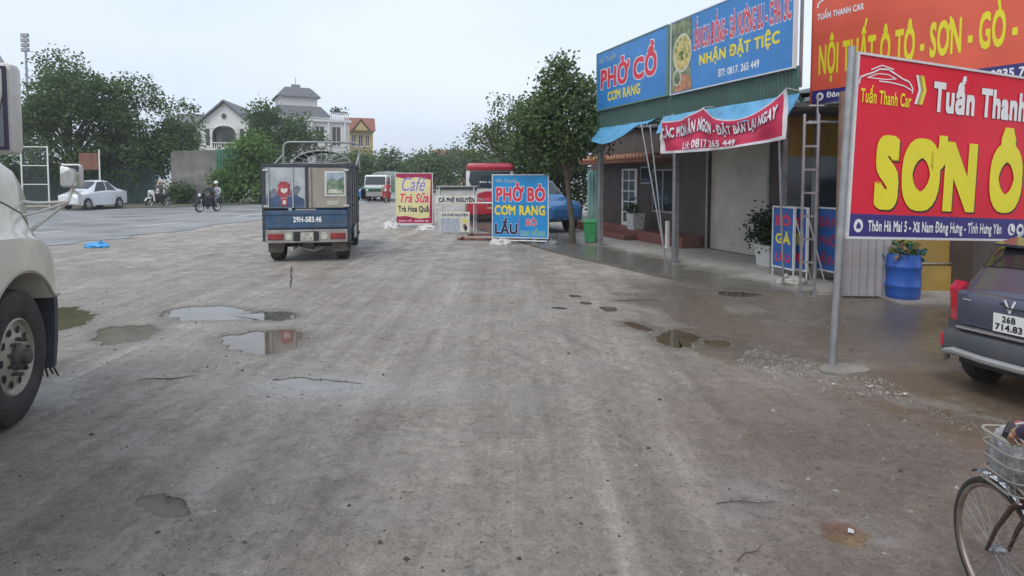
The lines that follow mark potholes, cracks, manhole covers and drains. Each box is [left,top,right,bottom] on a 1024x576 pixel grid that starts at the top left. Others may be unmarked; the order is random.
pothole [703,338,733,348]
pothole [88,323,161,347]
pothole [717,290,761,298]
pothole [623,320,657,332]
pothole [134,490,194,523]
pothole [58,305,100,332]
pothole [215,329,313,356]
pothole [153,305,302,322]
pothole [653,328,703,350]
